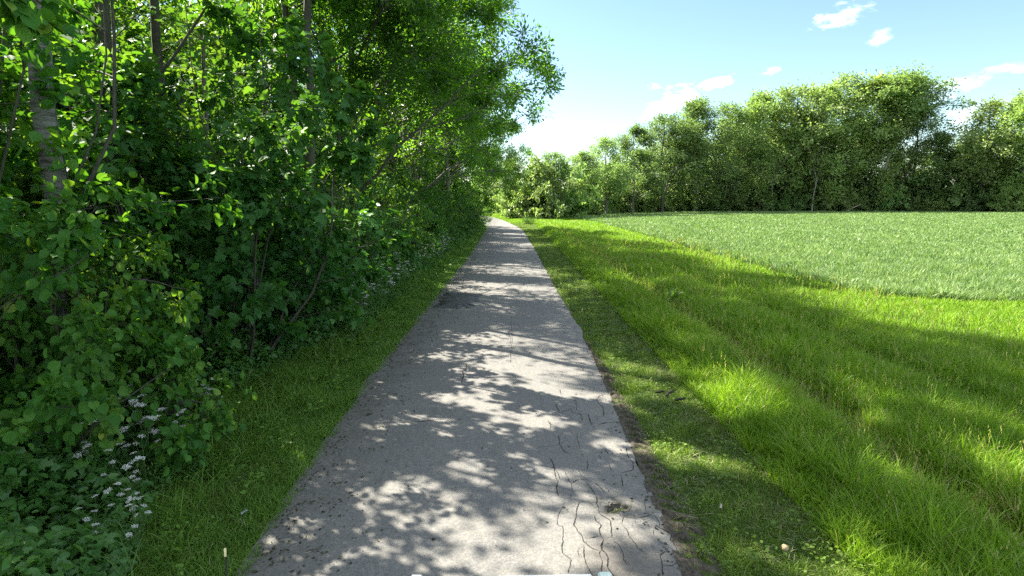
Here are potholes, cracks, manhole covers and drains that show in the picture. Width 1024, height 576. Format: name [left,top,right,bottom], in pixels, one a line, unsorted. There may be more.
pothole [604,502,632,514]
crack [548,391,688,575]
